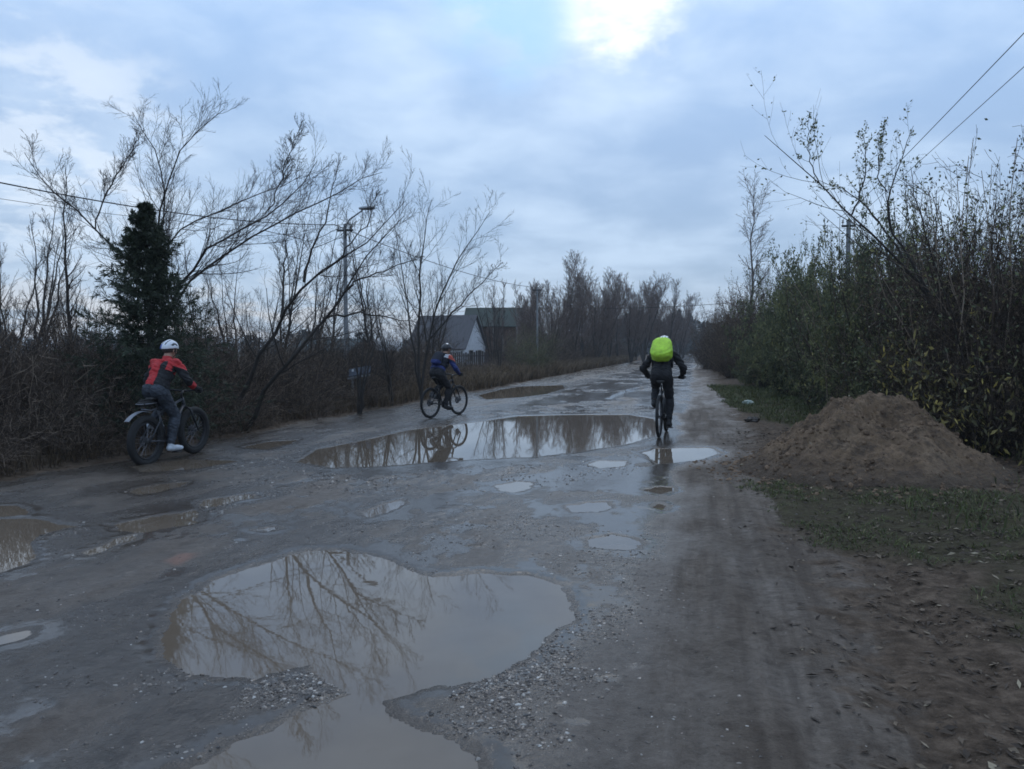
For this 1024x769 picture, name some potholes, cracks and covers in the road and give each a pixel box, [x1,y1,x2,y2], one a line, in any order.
pothole [99,508,209,533]
pothole [0,515,87,573]
pothole [476,385,566,399]
pothole [0,504,37,517]
pothole [152,691,494,769]
pothole [576,533,649,551]
pothole [122,481,193,495]
pothole [188,493,267,508]
pothole [639,446,726,464]
pothole [293,414,664,468]
pothole [146,546,587,701]
